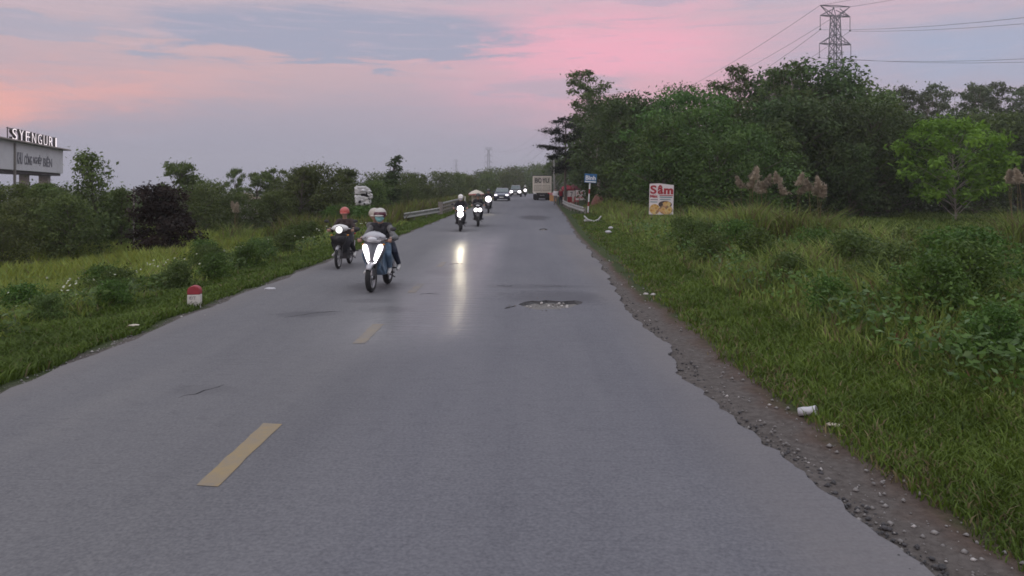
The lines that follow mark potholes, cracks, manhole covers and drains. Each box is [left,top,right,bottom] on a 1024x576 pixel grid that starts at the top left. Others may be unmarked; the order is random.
pothole [509,297,582,311]
